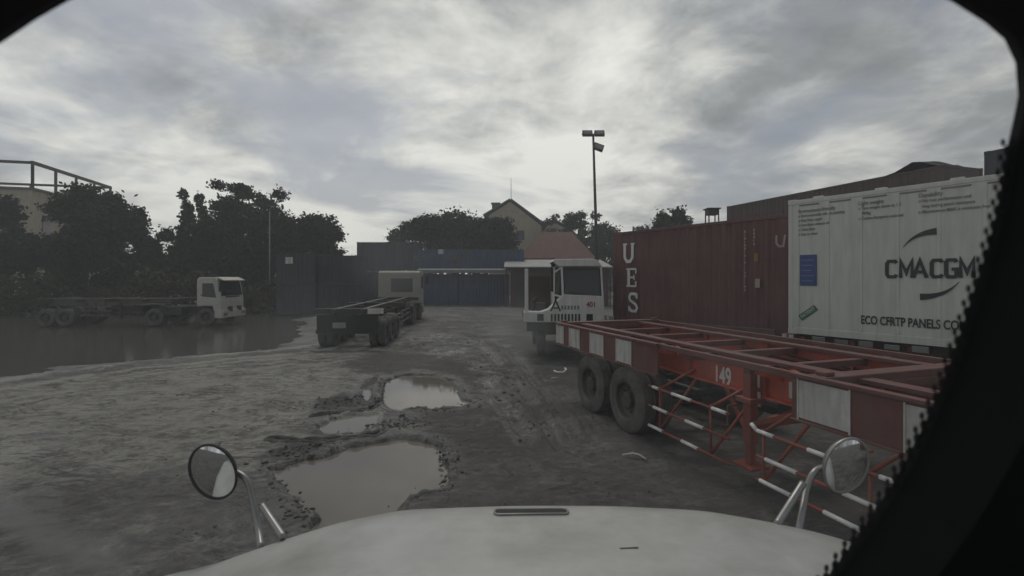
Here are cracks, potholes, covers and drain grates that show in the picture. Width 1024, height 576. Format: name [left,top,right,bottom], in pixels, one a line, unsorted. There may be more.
pothole [305,411,386,436]
pothole [374,372,478,413]
pothole [261,432,457,534]
pothole [355,373,385,406]
